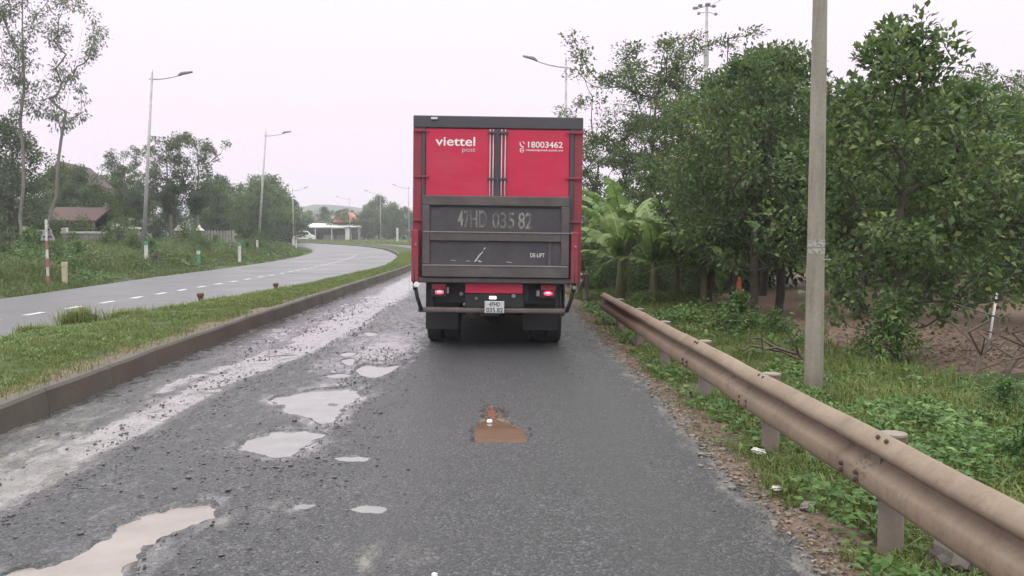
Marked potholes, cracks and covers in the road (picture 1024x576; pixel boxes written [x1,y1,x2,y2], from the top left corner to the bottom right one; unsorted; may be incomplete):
pothole [0,499,223,576]
pothole [354,363,402,378]
pothole [338,358,357,367]
pothole [343,503,393,514]
pothole [466,404,532,443]
pothole [267,385,366,426]
pothole [232,429,329,459]
pothole [288,500,320,509]
